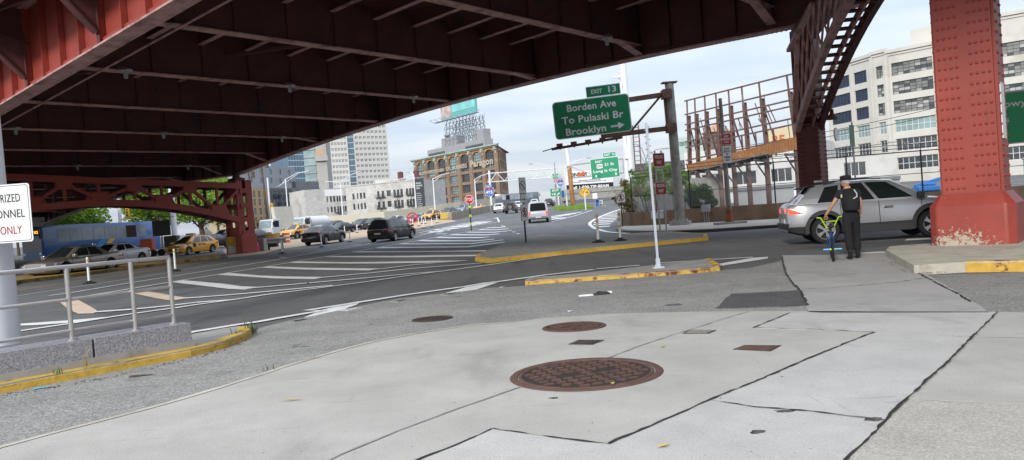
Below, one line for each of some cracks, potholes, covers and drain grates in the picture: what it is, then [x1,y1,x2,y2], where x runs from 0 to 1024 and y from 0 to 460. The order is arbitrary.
manhole cover [542,321,606,332]
manhole cover [510,357,664,392]
crack [415,256,998,460]
